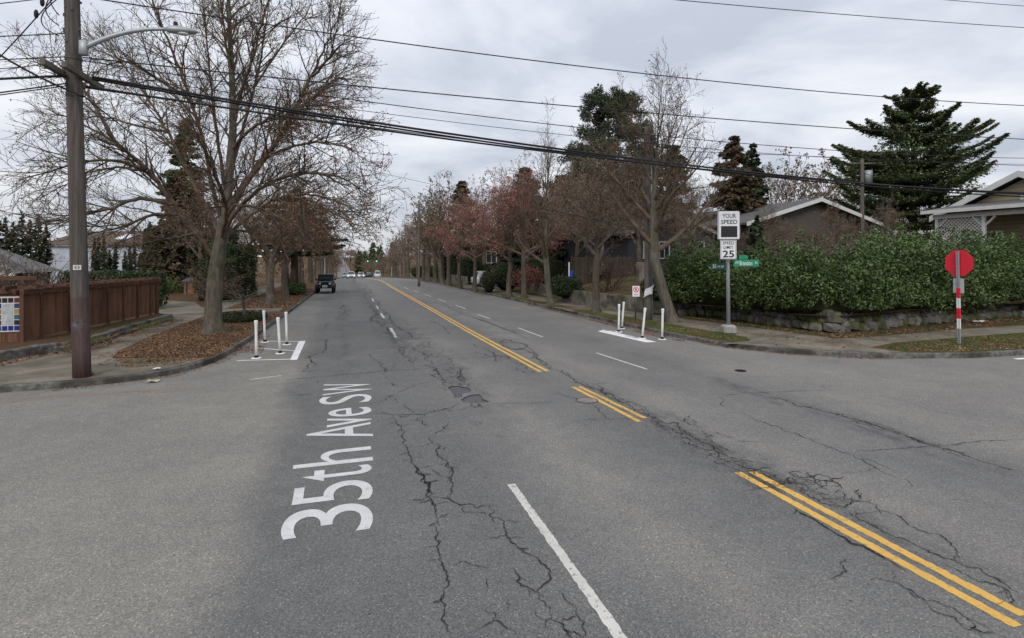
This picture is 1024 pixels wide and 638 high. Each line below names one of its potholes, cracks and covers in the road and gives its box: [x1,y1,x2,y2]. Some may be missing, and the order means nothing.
crack [520,345,1022,638]
pothole [448,386,471,398]
crack [483,340,550,374]
crack [385,417,586,638]
crack [288,284,500,436]
pothole [461,394,488,404]
